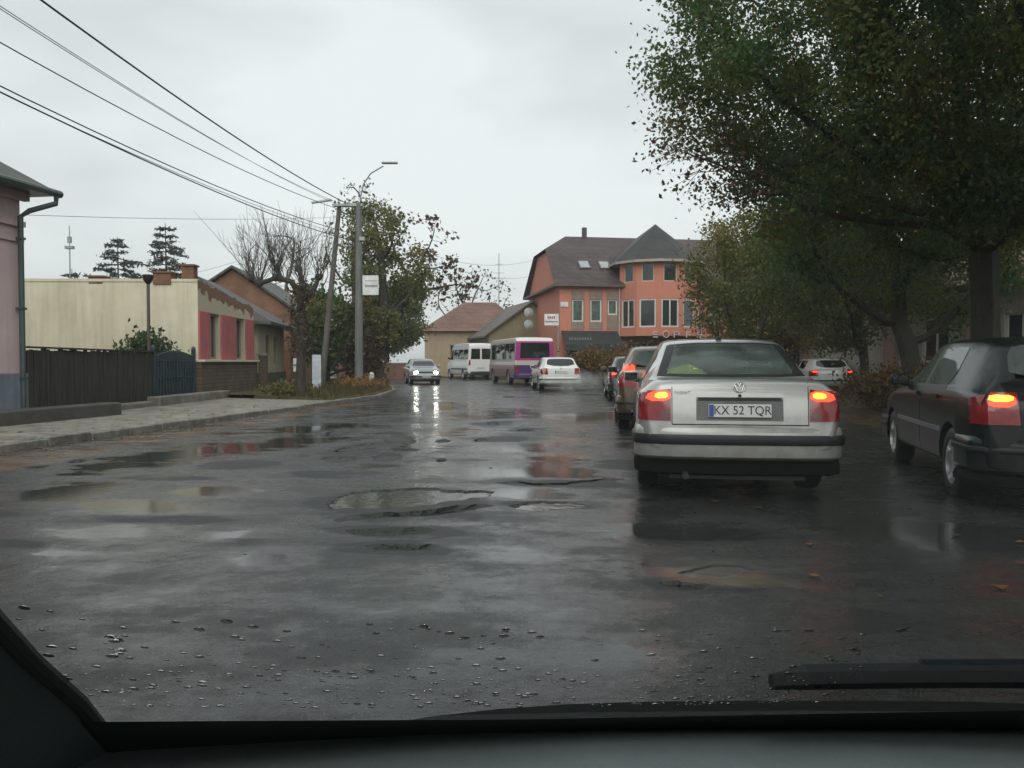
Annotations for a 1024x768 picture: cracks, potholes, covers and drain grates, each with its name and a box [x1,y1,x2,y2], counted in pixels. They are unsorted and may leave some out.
pothole [508,501,587,511]
pothole [343,527,438,537]
pothole [333,504,494,523]
pothole [659,580,711,591]
pothole [325,487,494,509]
pothole [678,564,755,577]
